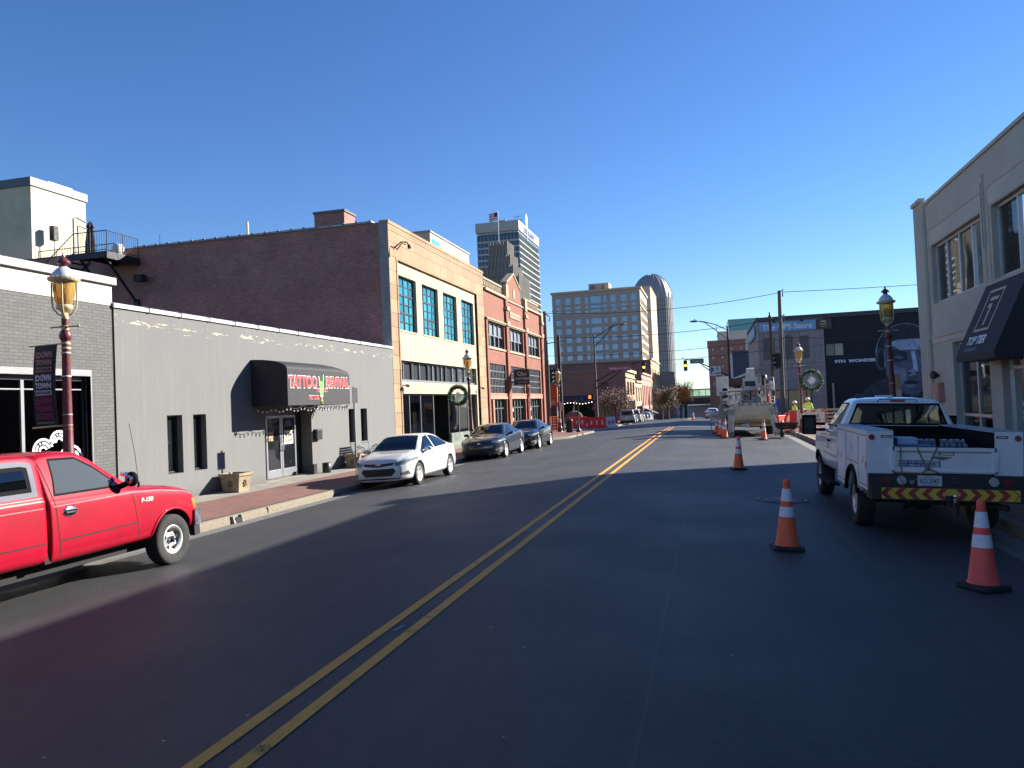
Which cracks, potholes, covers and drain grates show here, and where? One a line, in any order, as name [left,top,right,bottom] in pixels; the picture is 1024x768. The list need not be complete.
manhole cover [756,496,809,504]
